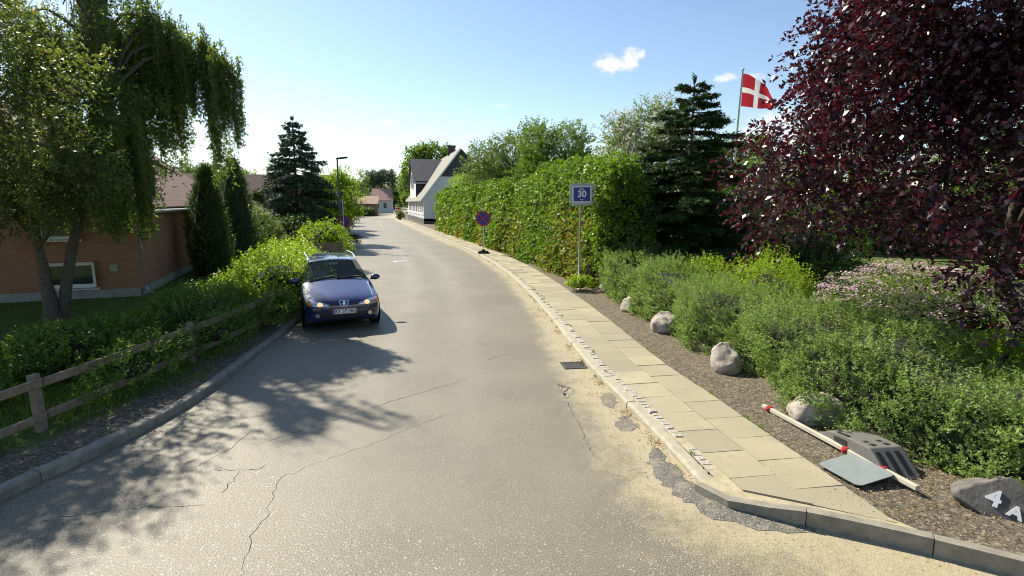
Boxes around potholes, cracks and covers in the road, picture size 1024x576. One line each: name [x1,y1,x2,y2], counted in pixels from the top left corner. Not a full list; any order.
pothole [556,383,574,398]
crack [195,378,470,576]
crack [568,402,595,457]
drain grate [560,361,588,369]
crack [33,505,194,523]
